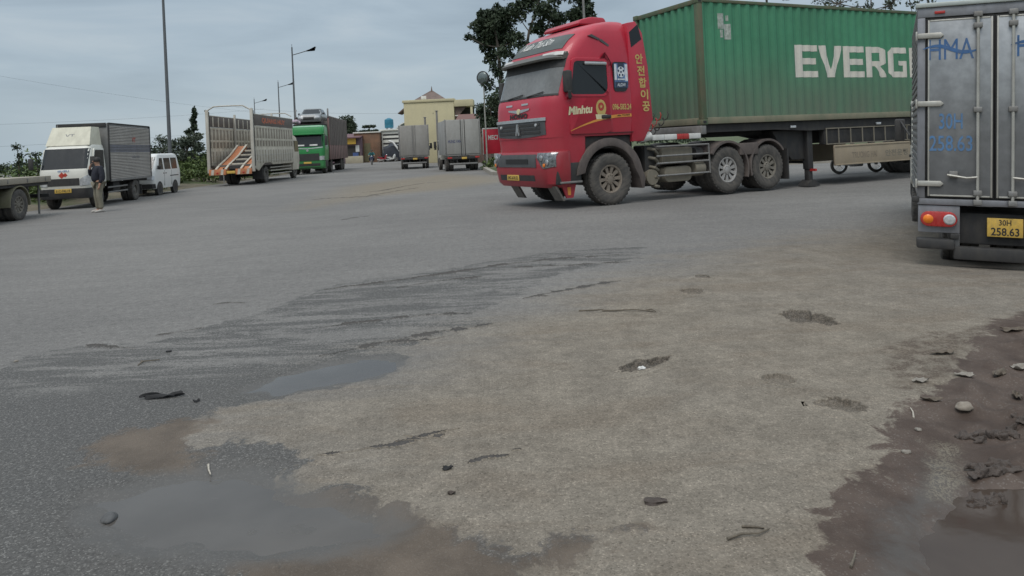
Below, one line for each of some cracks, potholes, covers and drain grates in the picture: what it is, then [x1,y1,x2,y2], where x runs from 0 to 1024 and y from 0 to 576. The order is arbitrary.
crack [317,427,522,464]
pothole [803,392,881,420]
pothole [602,352,684,380]
pothole [765,306,851,331]
